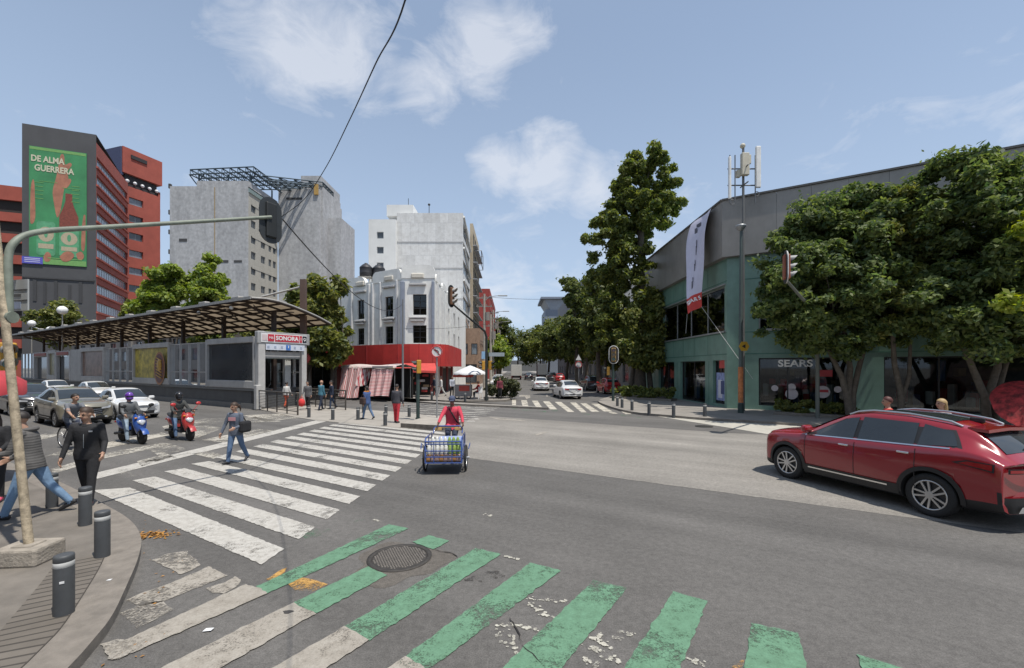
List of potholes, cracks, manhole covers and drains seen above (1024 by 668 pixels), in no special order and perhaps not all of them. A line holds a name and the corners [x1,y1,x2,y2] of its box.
manhole cover [366,544,432,573]
crack [510,619,541,662]
